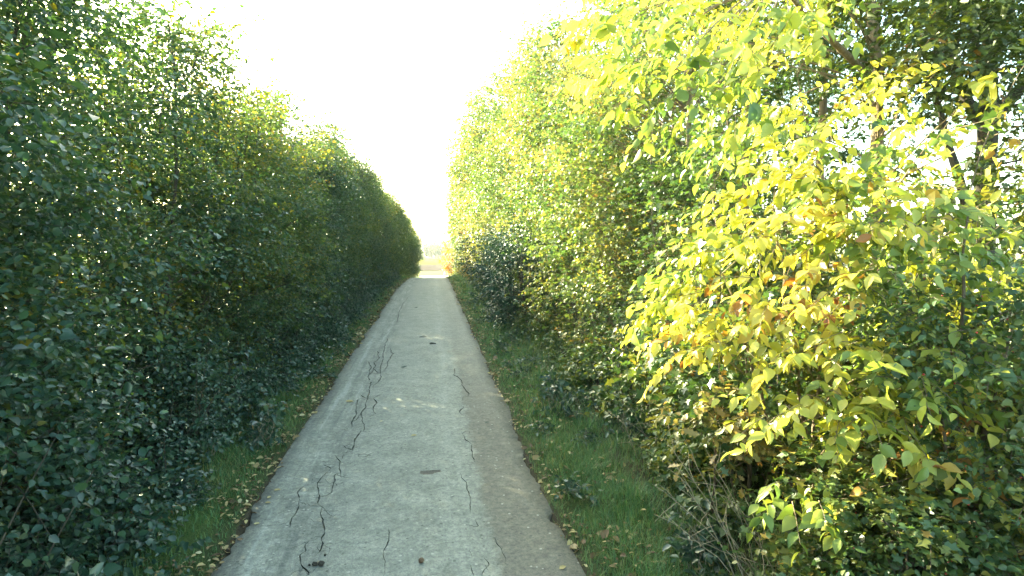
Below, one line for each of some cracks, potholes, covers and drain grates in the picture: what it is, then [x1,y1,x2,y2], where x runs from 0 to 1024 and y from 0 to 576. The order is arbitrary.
crack [278,339,394,576]
crack [461,431,506,575]
